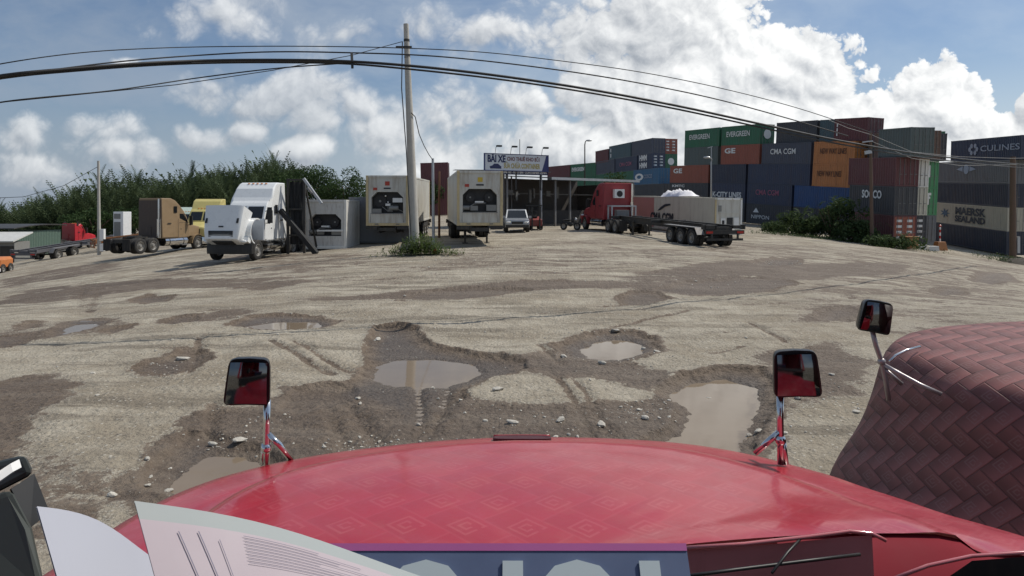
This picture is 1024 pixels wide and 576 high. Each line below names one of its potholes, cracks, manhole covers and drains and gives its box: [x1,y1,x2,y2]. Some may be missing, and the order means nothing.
pothole [342,322,529,430]
pothole [616,290,673,306]
pothole [811,305,858,322]
pothole [225,312,341,330]
pothole [128,348,212,375]
pothole [98,325,134,333]
pothole [638,365,776,453]
pothole [44,318,117,336]
pothole [15,322,42,330]
pothole [549,330,663,363]
